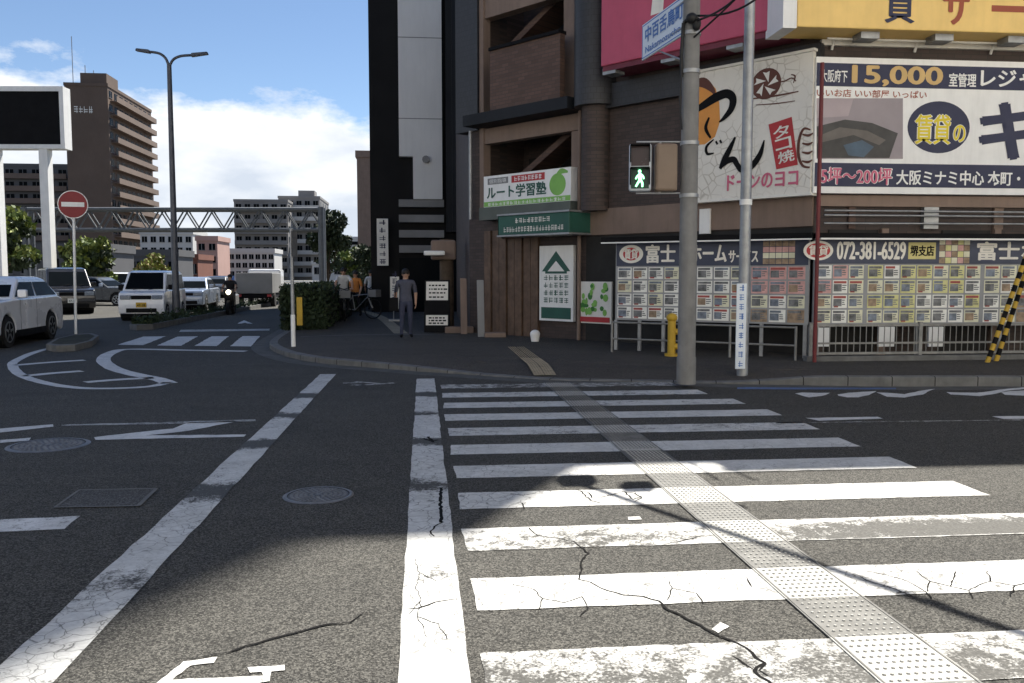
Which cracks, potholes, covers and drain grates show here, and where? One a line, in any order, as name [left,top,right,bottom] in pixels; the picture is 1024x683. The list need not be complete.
crack [424,488,444,536]
crack [178,612,384,663]
crack [512,528,772,683]
crack [409,559,453,638]
crack [575,489,642,503]
crack [856,571,1024,599]
manhole cover [282,486,354,504]
utility cover [54,488,158,507]
manhole cover [4,438,91,453]
